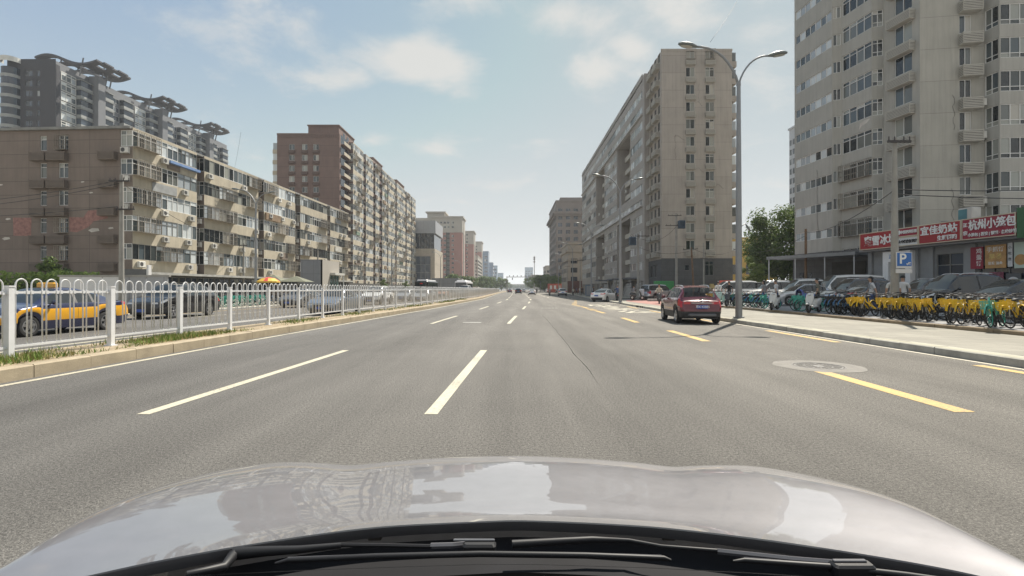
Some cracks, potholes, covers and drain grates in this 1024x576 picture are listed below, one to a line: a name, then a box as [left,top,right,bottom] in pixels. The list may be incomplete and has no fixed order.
manhole cover [772,360,868,373]
